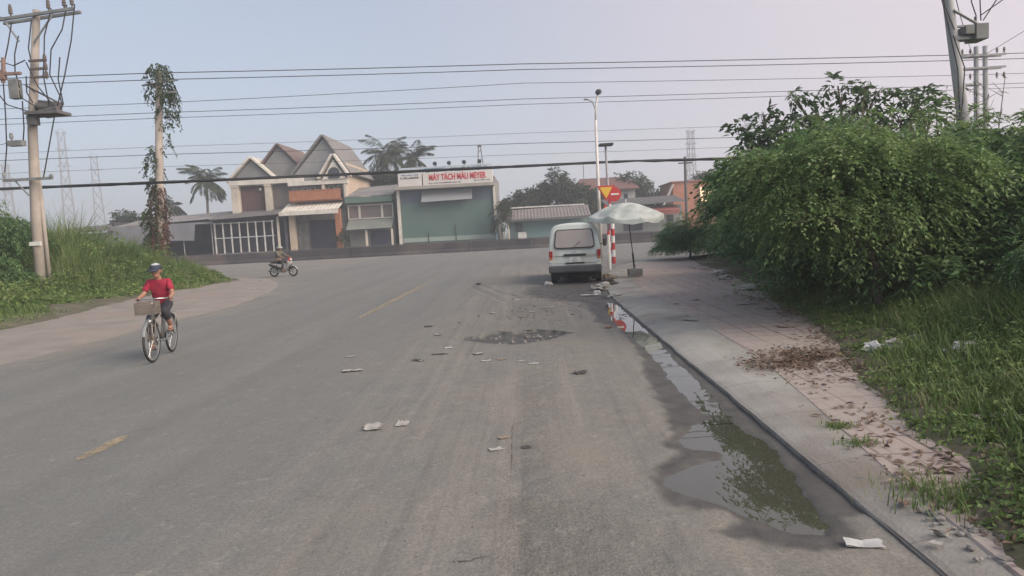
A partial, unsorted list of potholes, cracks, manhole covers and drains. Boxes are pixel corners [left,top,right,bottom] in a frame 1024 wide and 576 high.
pothole [450,329,579,345]
